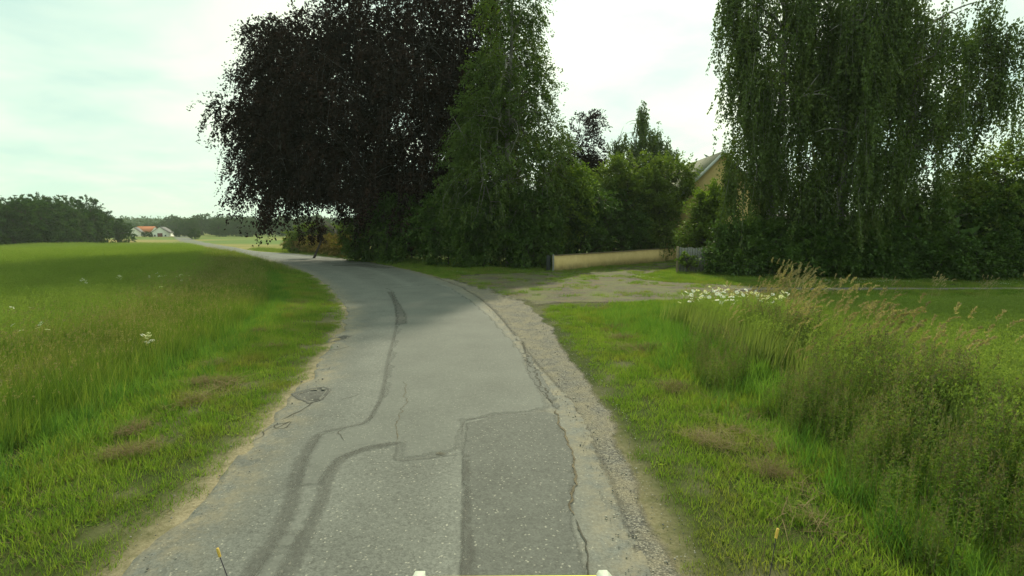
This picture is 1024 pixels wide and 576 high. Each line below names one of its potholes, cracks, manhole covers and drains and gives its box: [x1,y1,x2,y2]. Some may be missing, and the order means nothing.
pothole [291,386,331,403]
crack [515,338,589,575]
